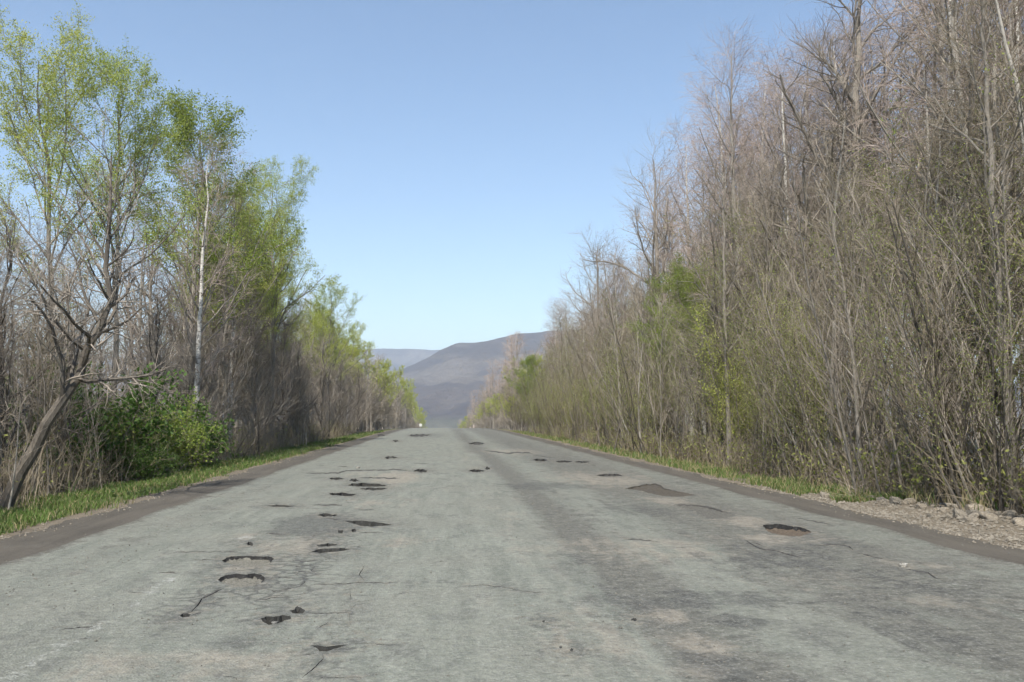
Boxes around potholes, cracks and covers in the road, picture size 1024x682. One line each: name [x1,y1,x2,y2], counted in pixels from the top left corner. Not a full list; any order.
pothole [626,483,694,497]
